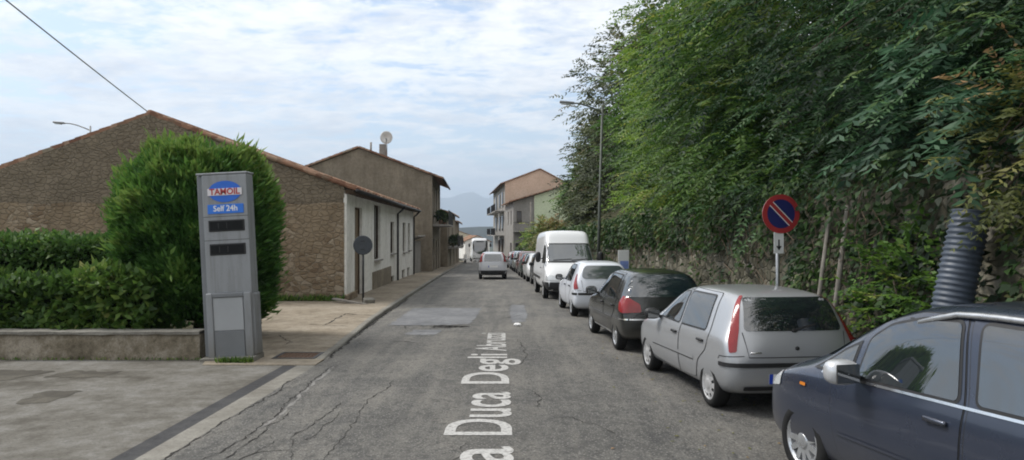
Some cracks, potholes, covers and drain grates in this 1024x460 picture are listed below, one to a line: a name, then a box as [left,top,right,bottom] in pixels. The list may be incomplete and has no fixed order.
crack [164,299,450,460]
